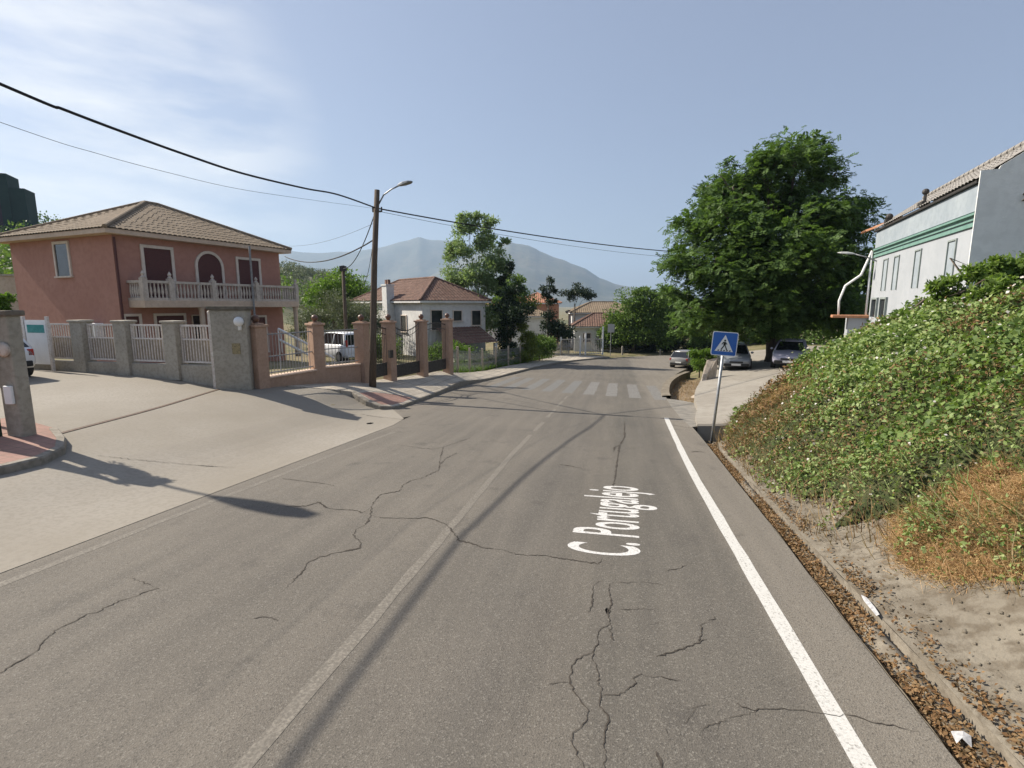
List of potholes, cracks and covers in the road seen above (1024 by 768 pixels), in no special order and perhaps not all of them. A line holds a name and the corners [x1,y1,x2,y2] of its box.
crack [0,578,158,673]
crack [560,423,625,486]
crack [686,703,913,731]
crack [549,565,715,768]
crack [283,438,602,590]
